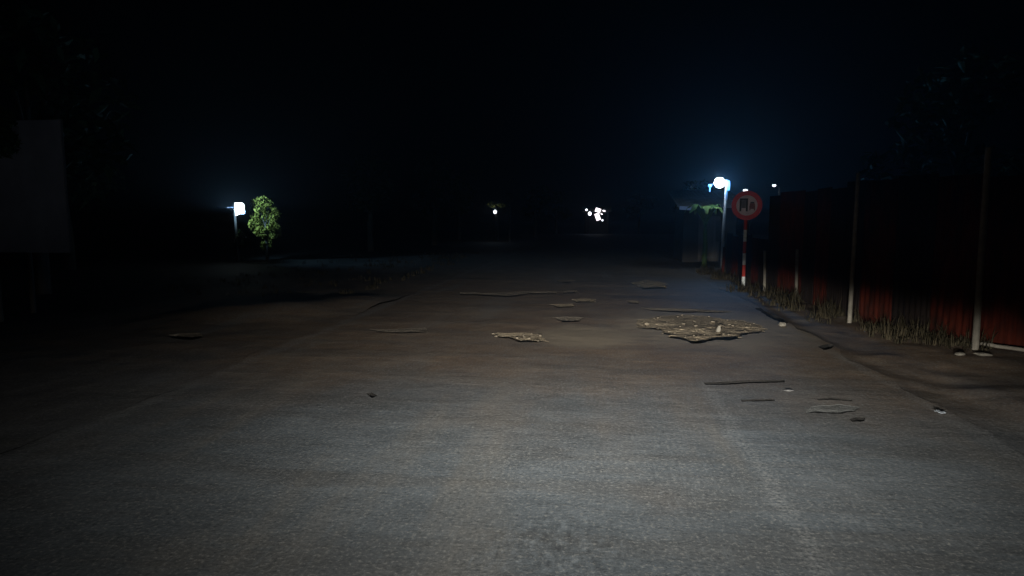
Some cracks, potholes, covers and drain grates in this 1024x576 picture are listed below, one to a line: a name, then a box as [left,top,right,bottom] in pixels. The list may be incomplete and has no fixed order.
crack [704,380,785,402]
pothole [632,280,667,289]
pothole [636,314,768,344]
pothole [492,333,549,342]
pothole [805,404,860,414]
